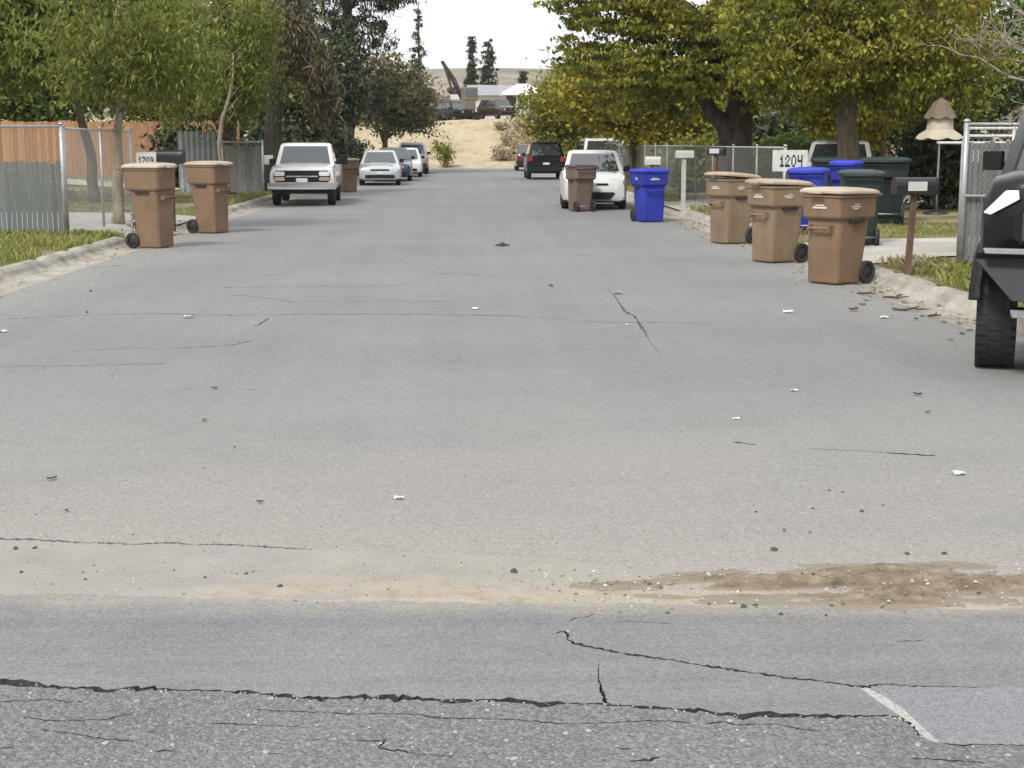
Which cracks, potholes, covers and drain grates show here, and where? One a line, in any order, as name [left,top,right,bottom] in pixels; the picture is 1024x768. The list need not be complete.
crack [0,537,313,550]
crack [613,747,660,762]
crack [357,740,454,757]
crack [0,614,977,742]
crack [911,743,1024,763]
crack [9,274,699,367]
